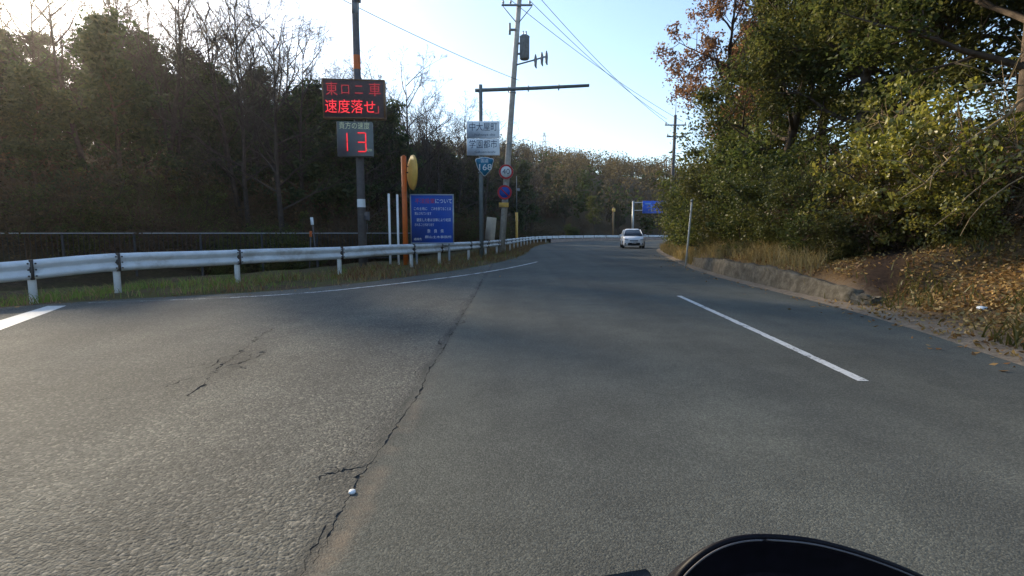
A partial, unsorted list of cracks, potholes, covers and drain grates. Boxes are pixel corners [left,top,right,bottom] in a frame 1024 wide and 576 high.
crack [102,329,286,400]
crack [300,281,482,576]
